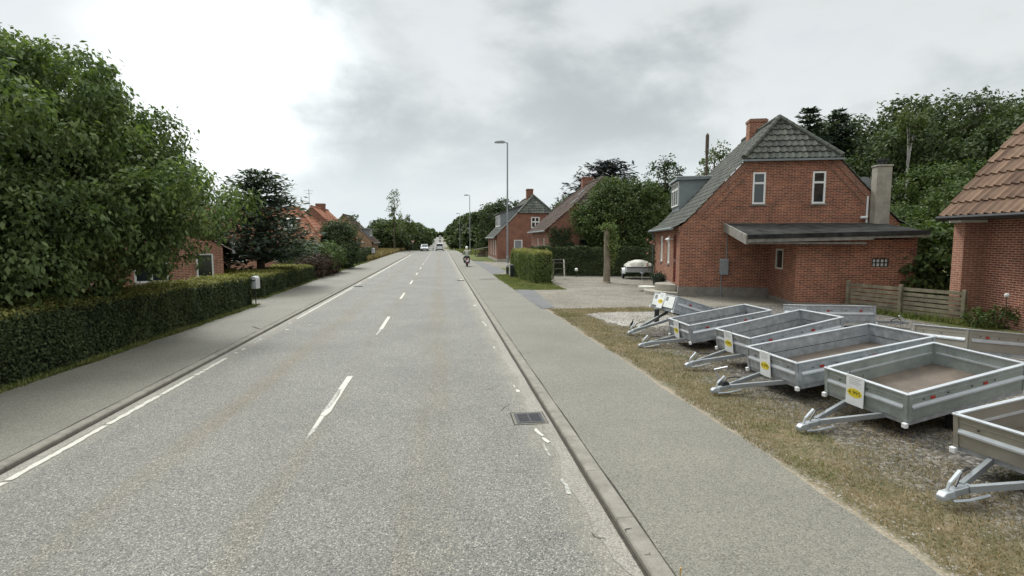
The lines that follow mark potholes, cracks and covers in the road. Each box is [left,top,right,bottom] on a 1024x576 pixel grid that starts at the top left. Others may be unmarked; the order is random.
drain grate [514,412,545,424]
